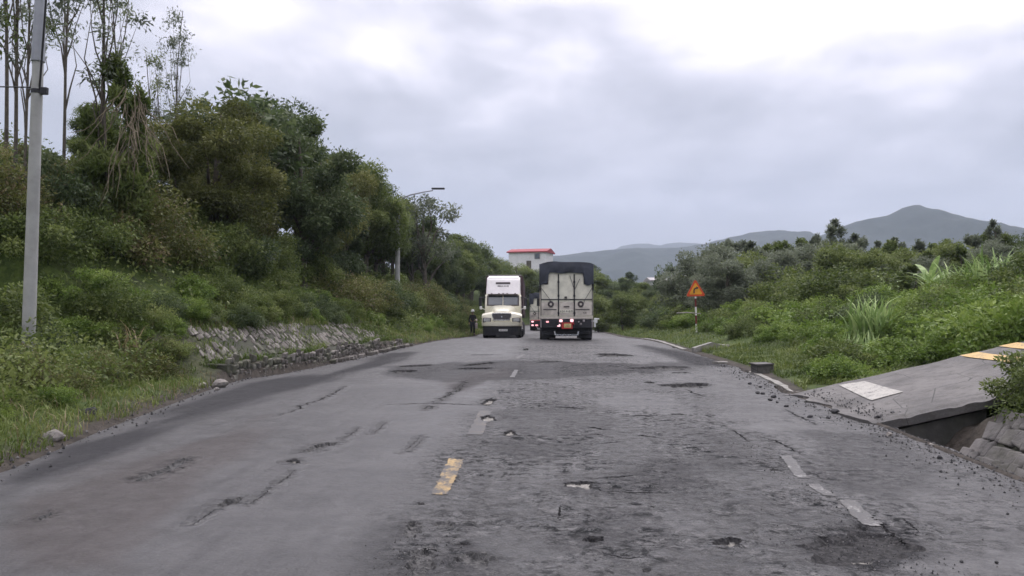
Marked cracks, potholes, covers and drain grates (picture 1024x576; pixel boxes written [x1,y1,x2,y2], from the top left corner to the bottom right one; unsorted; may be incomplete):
pothole [581,535,604,543]
pothole [795,531,926,566]
pothole [709,536,743,547]
pothole [564,481,595,489]
